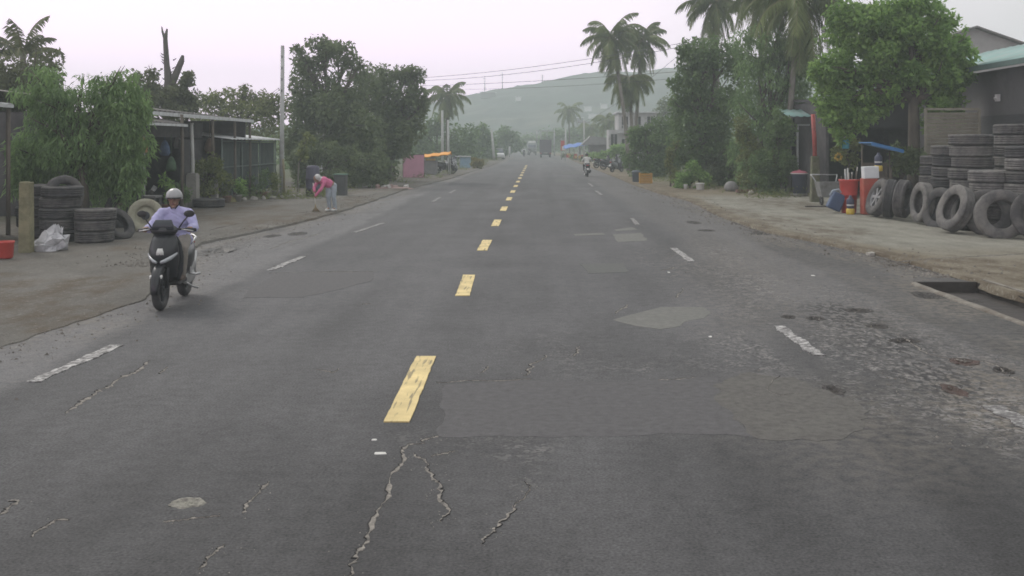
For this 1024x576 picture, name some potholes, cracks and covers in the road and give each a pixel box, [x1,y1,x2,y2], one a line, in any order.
crack [480,477,536,546]
pothole [950,358,980,366]
pothole [822,384,846,396]
crack [328,434,458,576]
crack [65,360,168,414]
pothole [940,383,969,397]
crack [242,478,286,519]
crack [180,542,255,574]
pothole [993,366,1015,374]
crack [0,499,69,537]
